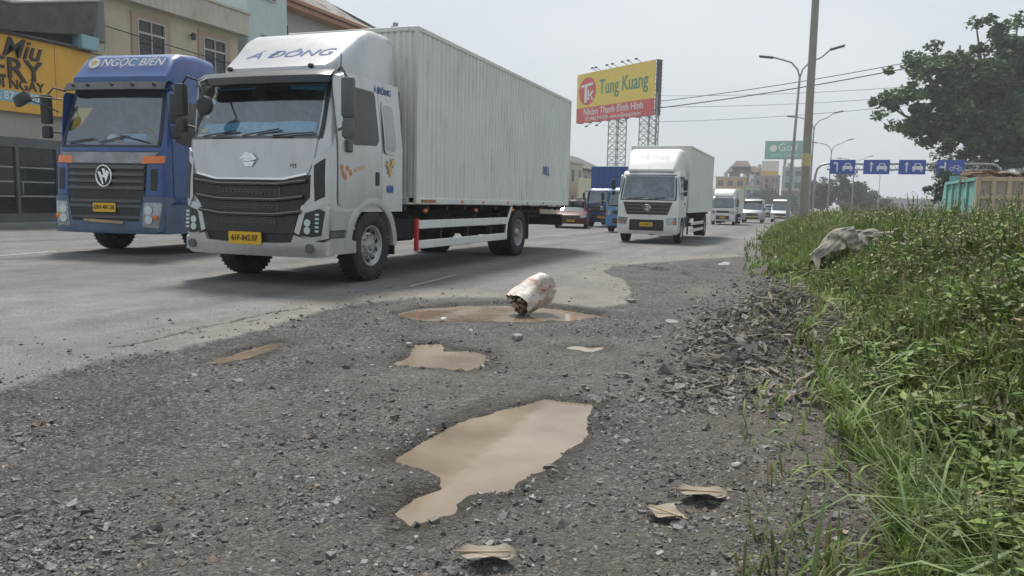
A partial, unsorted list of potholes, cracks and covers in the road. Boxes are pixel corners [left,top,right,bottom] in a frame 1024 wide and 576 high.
pothole [388,339,494,371]
pothole [388,300,609,323]
pothole [562,344,612,352]
pothole [198,340,292,364]
pothole [380,395,600,529]
